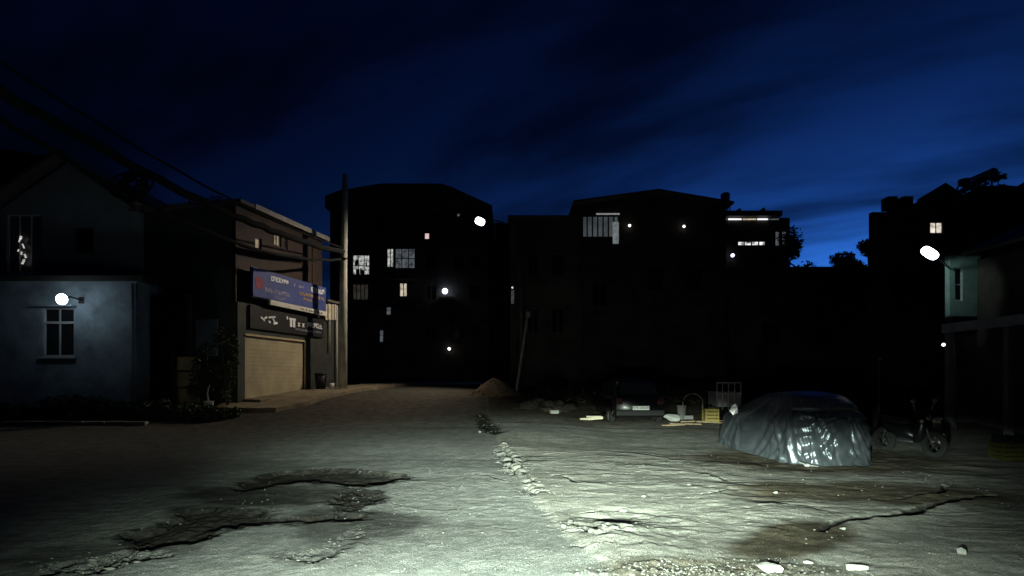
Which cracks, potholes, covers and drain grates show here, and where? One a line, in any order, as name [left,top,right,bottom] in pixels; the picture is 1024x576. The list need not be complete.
pothole [226,469,414,492]
pothole [114,507,374,551]
pothole [476,414,508,435]
pothole [325,487,388,512]
crack [505,448,999,532]
